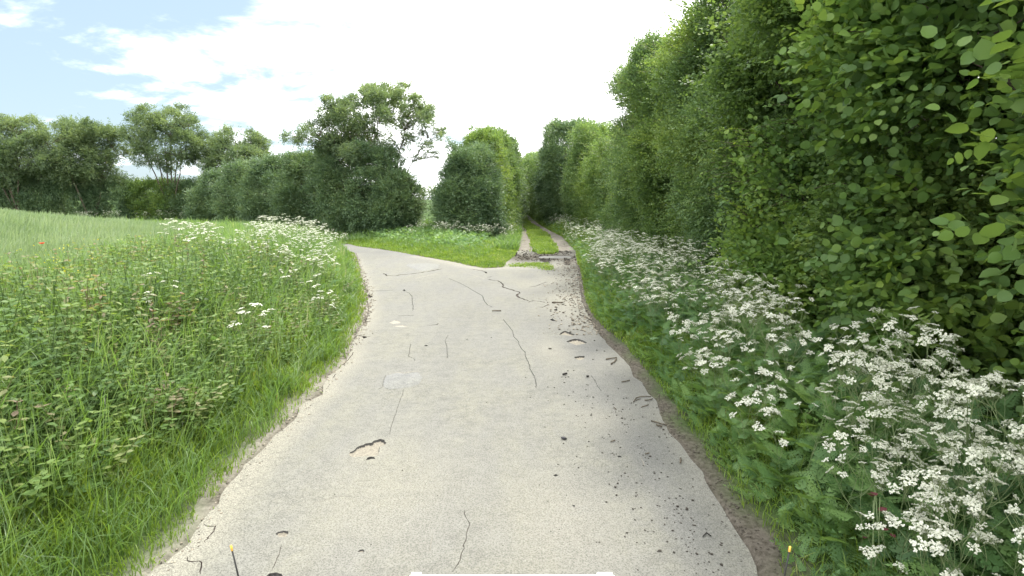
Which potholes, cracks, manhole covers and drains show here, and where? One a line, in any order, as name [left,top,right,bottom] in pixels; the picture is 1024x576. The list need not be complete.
pothole [349,439,386,457]
crack [379,345,421,434]
crack [383,269,547,388]
crack [452,496,470,572]
